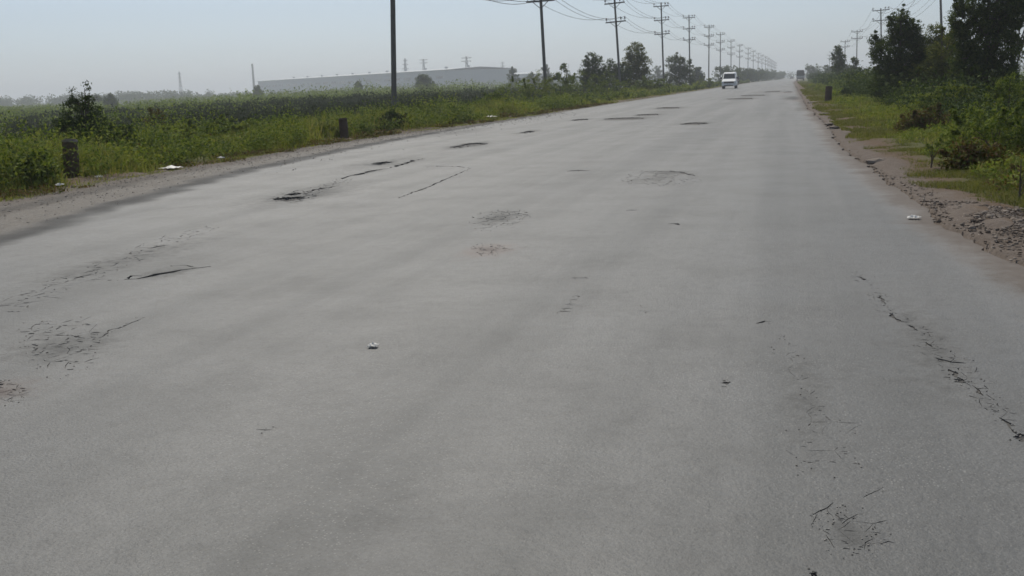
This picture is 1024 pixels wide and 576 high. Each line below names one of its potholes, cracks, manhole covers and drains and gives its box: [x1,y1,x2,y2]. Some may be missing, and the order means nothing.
crack [3,226,211,370]
crack [305,159,419,192]
crack [399,166,470,198]
crack [810,487,894,554]
pothole [273,190,317,201]
